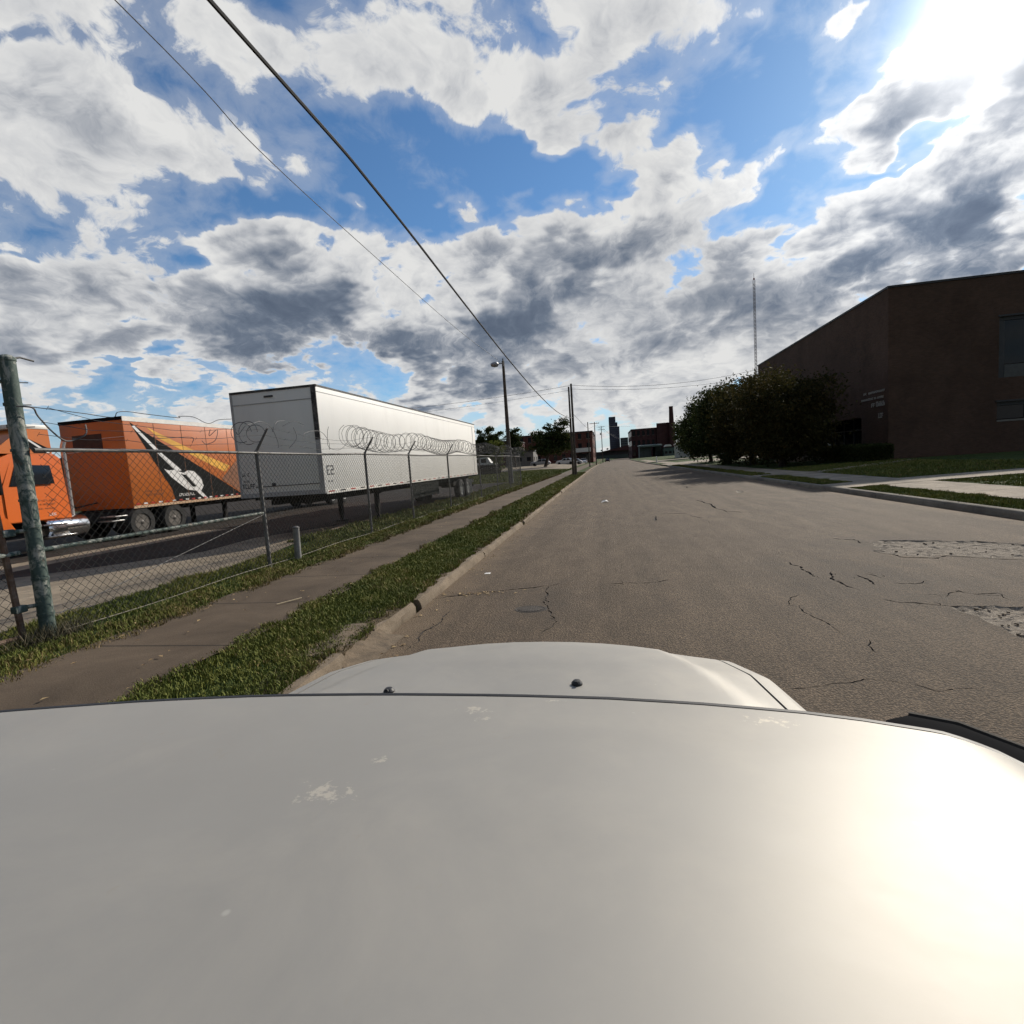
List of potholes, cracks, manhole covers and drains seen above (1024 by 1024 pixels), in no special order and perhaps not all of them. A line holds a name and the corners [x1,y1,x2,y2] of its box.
crack [794,679,972,692]
crack [789,562,1007,607]
crack [408,585,557,649]
pothole [950,606,1024,638]
pothole [872,540,1024,559]
